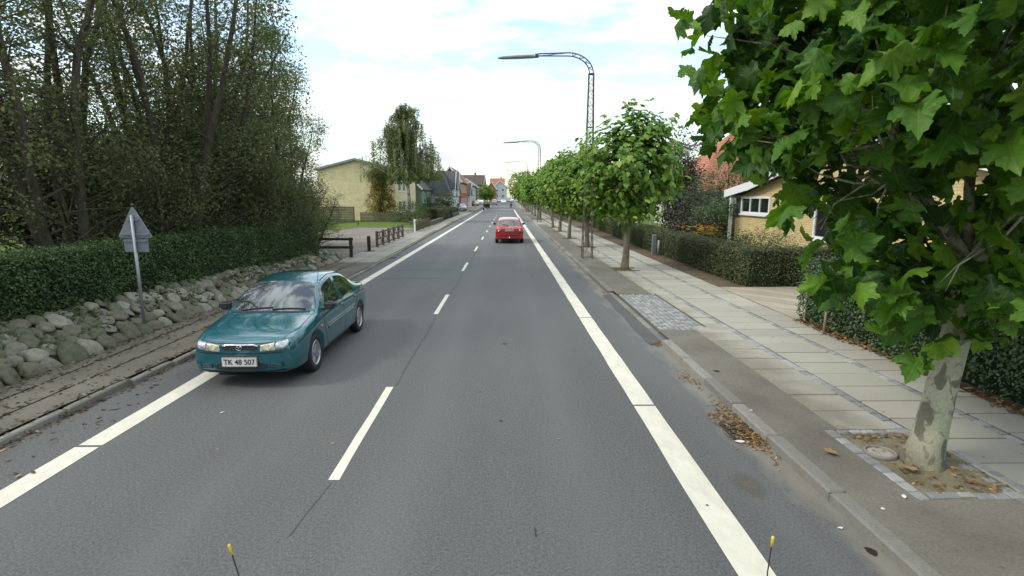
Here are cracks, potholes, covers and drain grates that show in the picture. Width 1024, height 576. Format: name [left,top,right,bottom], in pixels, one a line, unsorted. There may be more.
manhole cover [863,444,898,461]
drain grate [719,423,762,440]
